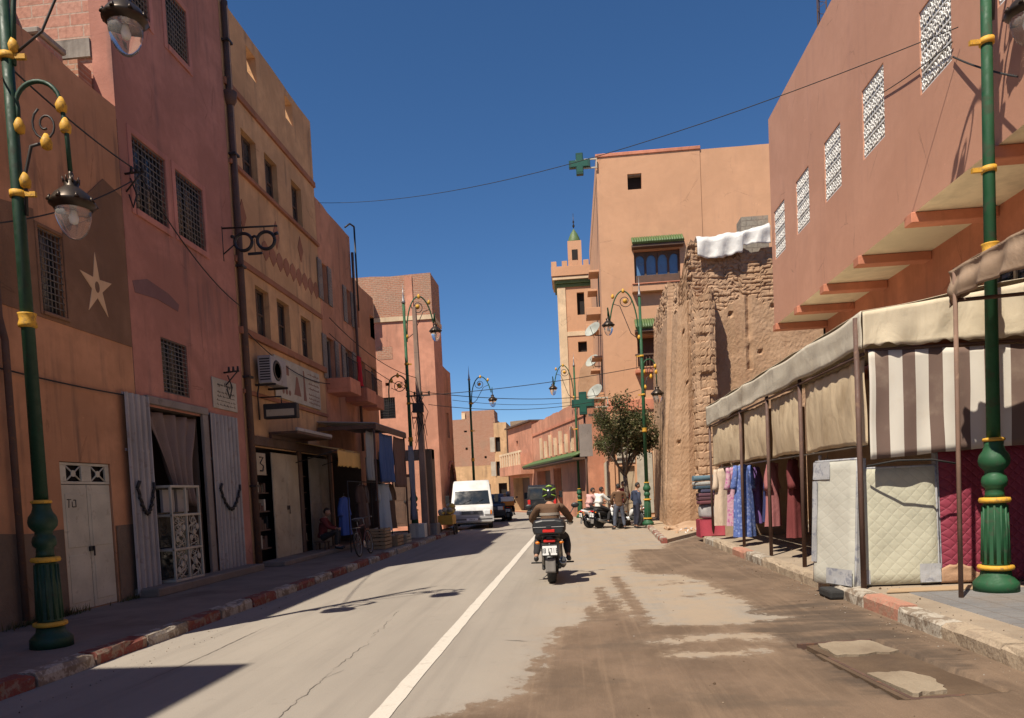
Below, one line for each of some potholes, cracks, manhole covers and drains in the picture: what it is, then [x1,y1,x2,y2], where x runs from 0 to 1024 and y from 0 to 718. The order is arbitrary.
crack [278,612,397,718]
